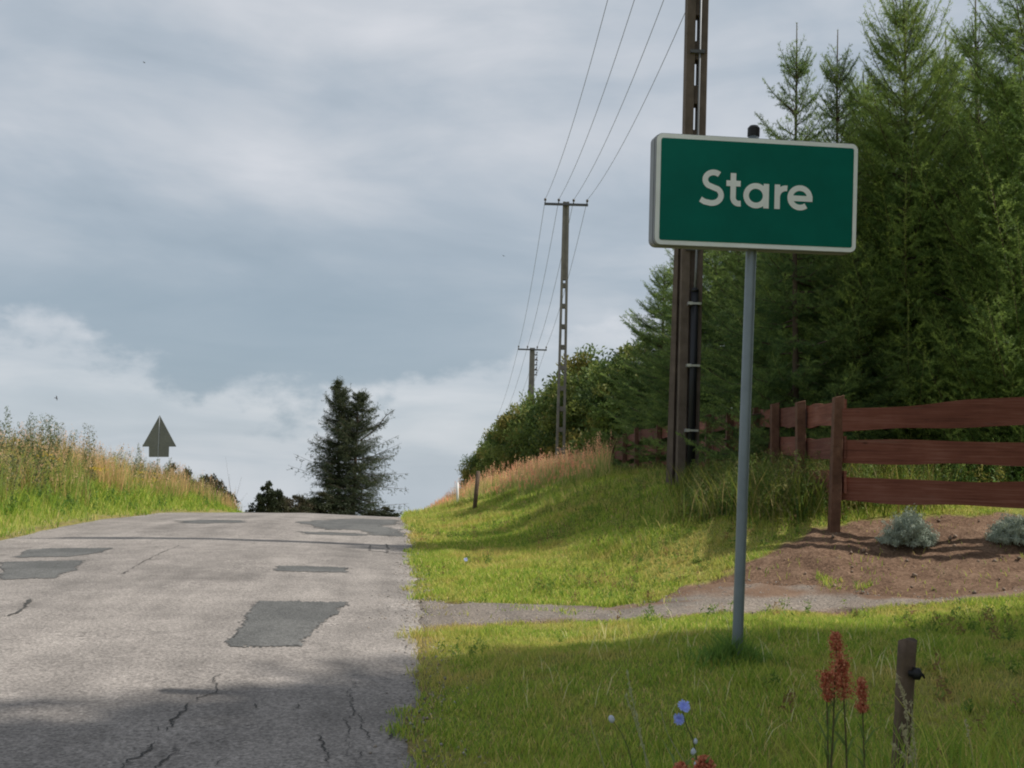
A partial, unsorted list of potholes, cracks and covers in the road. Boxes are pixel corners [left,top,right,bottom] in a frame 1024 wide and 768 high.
crack [122,673,221,768]
crack [7,598,32,616]
crack [343,680,393,766]
